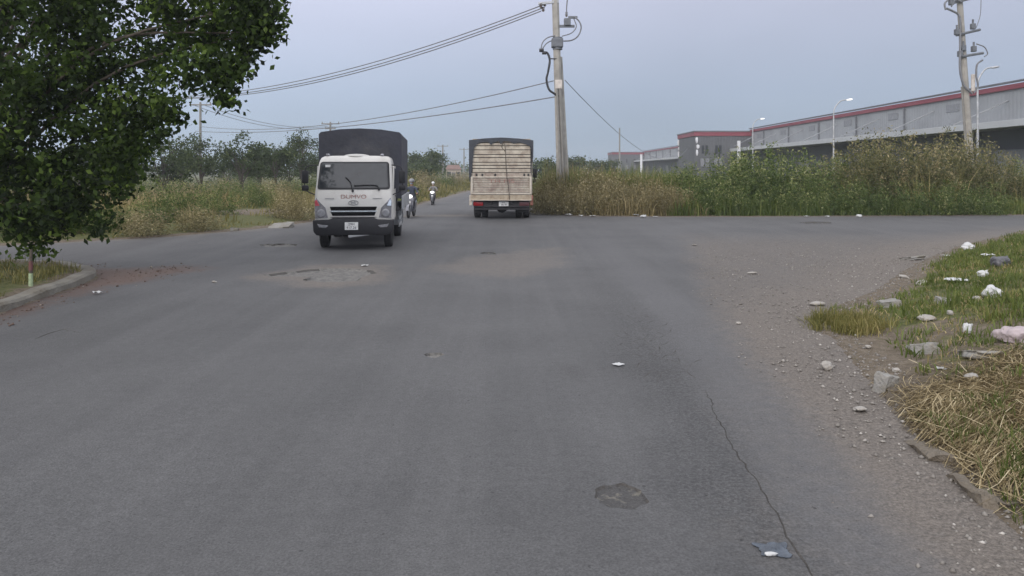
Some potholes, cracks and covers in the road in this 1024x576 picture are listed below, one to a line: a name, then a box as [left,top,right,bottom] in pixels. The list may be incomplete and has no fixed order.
crack [612,305,813,576]
pothole [595,483,649,510]
